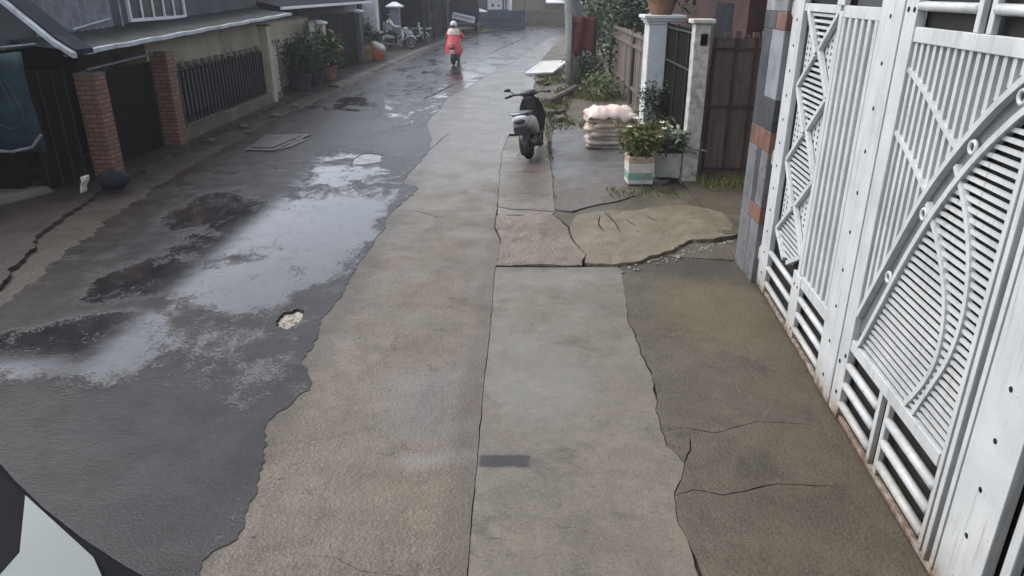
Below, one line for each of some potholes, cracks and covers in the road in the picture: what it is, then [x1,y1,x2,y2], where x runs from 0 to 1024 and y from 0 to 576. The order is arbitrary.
pothole [275,309,304,329]
crack [622,279,844,576]
crack [0,87,330,291]
manhole cover [245,134,311,152]
